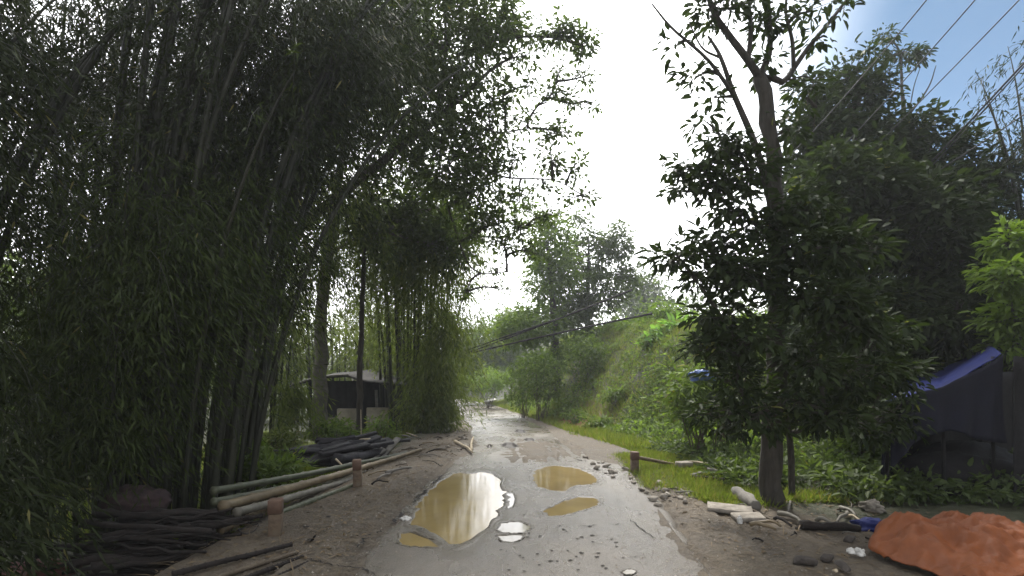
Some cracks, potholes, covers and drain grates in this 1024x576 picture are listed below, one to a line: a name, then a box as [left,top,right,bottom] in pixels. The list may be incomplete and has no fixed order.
pothole [529,465,602,492]
pothole [403,470,511,551]
pothole [496,534,525,542]
pothole [495,520,532,534]
pothole [538,496,602,517]
pothole [505,492,516,509]
